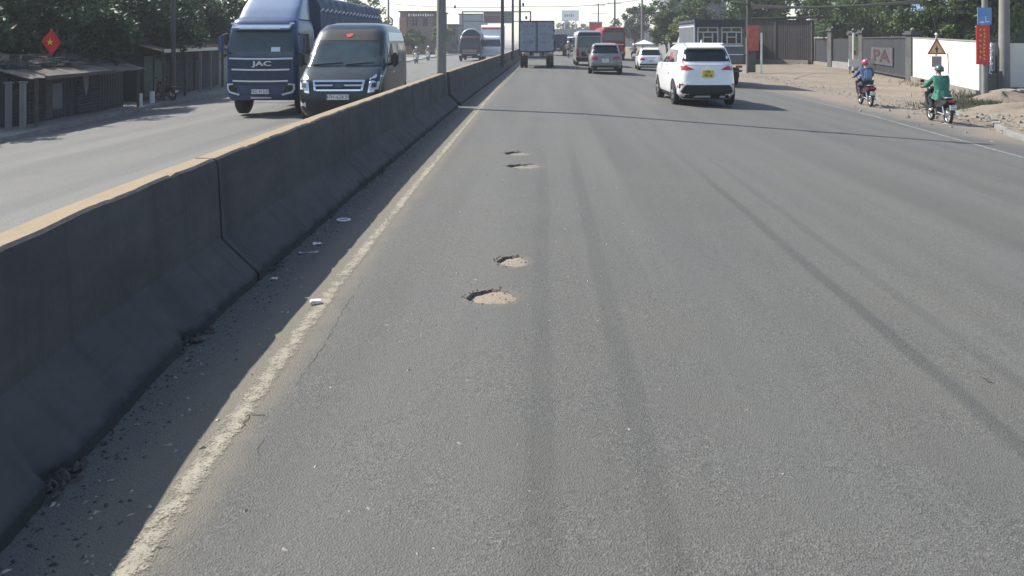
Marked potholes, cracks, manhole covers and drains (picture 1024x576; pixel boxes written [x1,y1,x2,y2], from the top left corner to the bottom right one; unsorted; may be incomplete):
pothole [493,254,528,267]
pothole [462,286,519,305]
